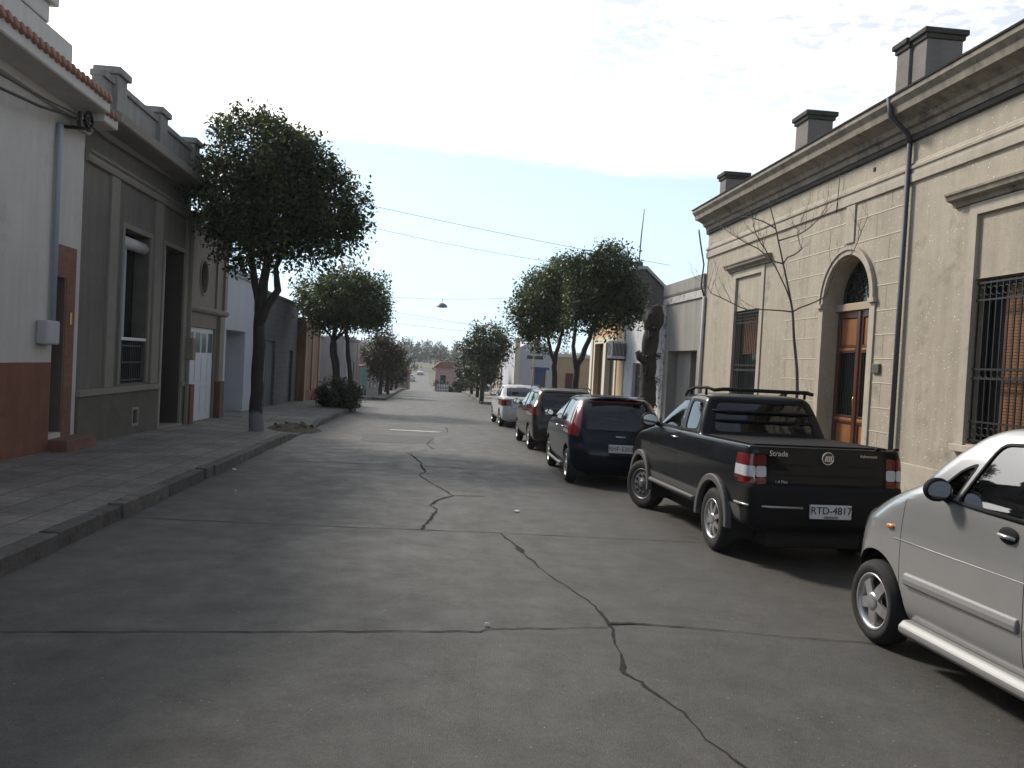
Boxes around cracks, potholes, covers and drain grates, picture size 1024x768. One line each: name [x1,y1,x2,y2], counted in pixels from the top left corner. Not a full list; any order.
crack [408,427,463,529]
crack [10,533,900,768]
